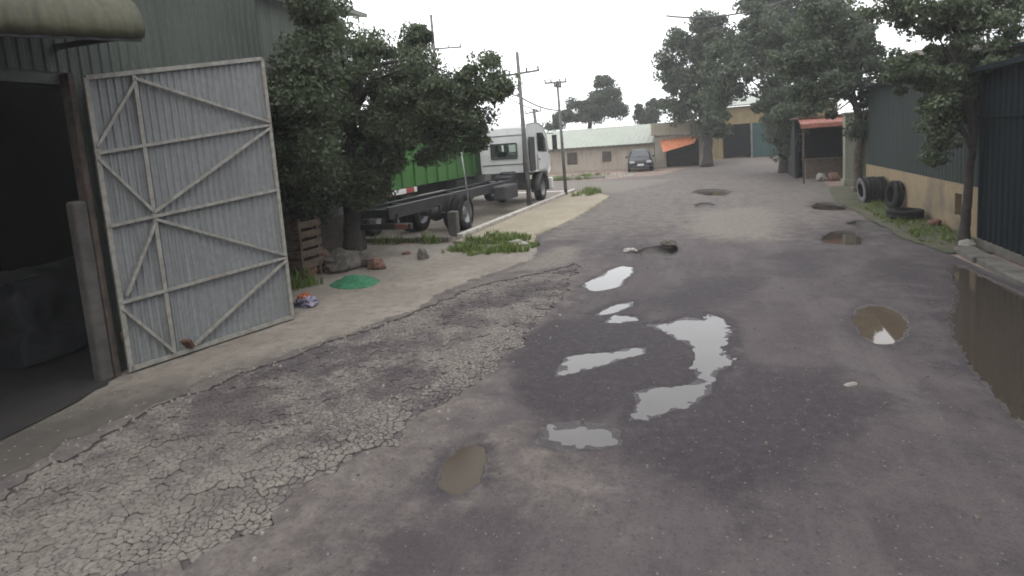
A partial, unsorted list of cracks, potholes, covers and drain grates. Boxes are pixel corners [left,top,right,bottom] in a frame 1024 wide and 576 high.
pothole [436,441,488,496]
pothole [635,246,679,256]
pothole [852,304,911,345]
crack [0,263,581,576]
